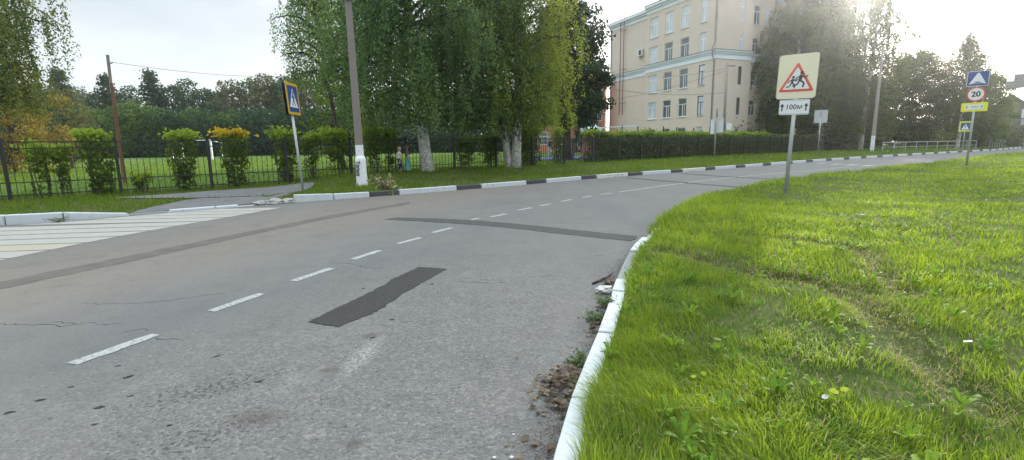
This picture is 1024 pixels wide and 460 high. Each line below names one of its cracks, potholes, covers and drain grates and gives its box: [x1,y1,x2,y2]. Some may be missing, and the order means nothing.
crack [4,290,241,340]
